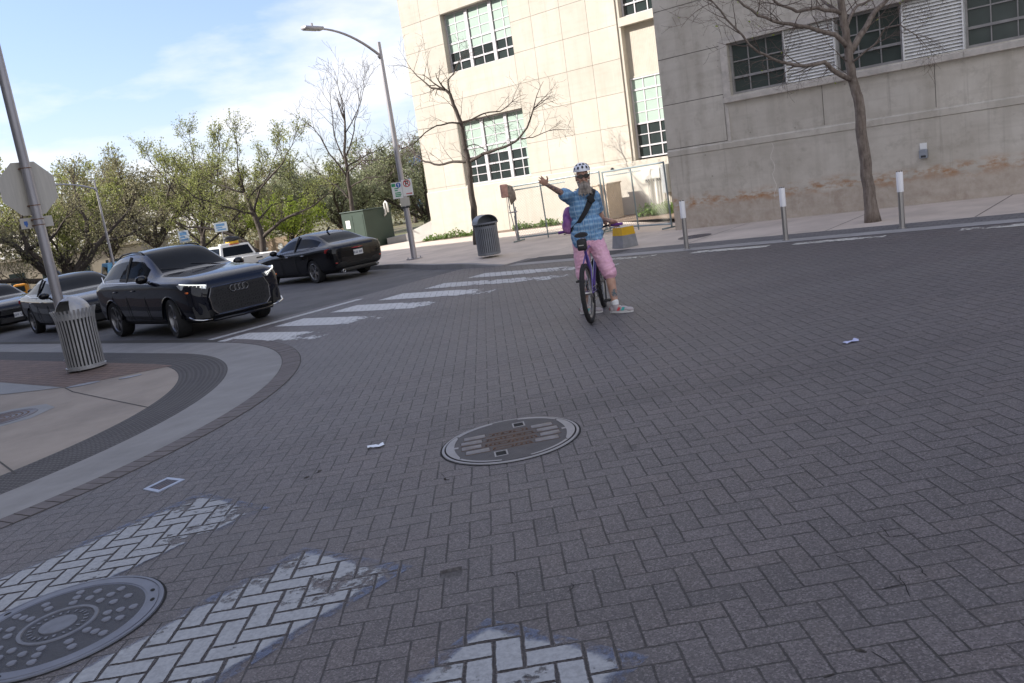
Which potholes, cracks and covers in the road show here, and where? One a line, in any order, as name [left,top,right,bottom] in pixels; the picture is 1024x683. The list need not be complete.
crack [884,566,928,596]
utility cover [143,477,185,493]
manhole cover [0,575,167,683]
manhole cover [440,417,581,466]
manhole cover [0,404,54,426]
